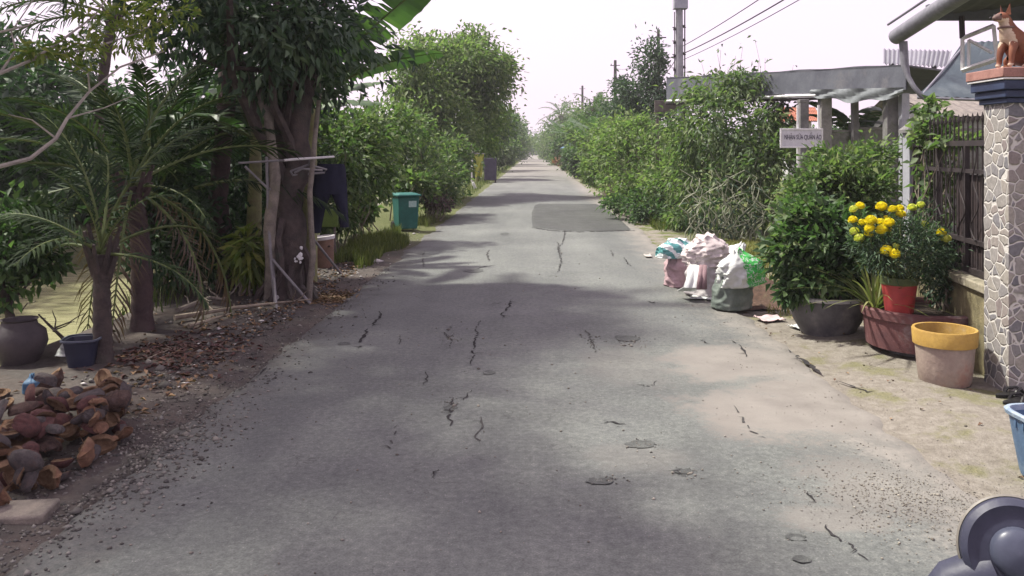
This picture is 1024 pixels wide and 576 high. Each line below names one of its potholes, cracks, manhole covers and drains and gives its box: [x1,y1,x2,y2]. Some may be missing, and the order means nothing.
crack [442,390,472,425]
crack [825,524,868,560]
pothole [624,440,655,448]
crack [444,301,512,364]
crack [354,312,402,347]
